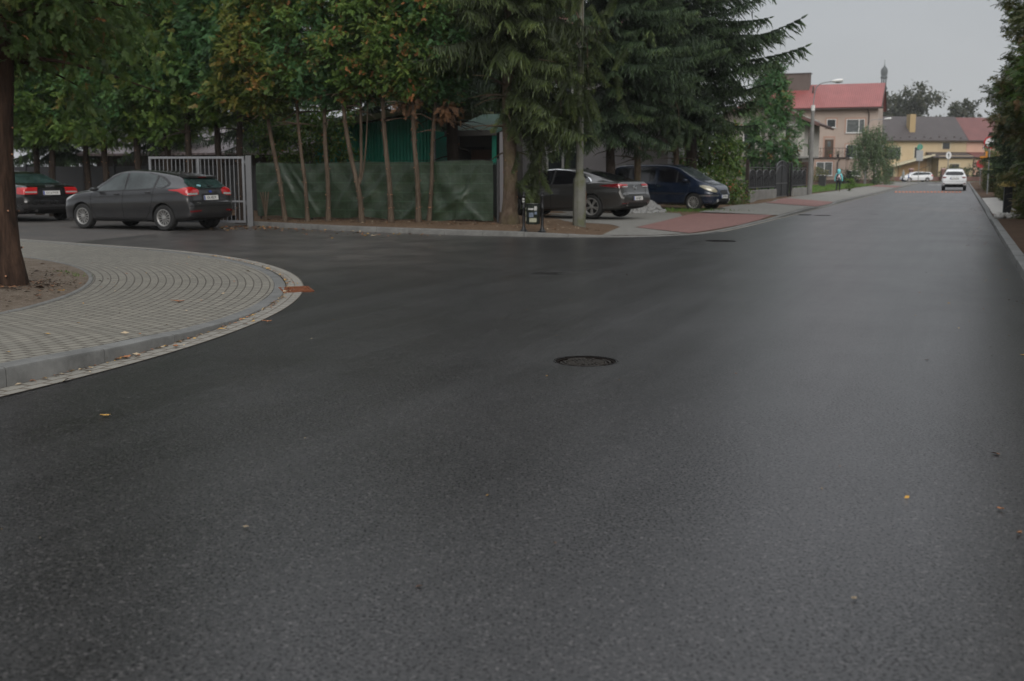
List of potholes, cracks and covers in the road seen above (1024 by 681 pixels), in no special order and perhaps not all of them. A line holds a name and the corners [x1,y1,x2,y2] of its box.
manhole cover [554,356,618,367]
